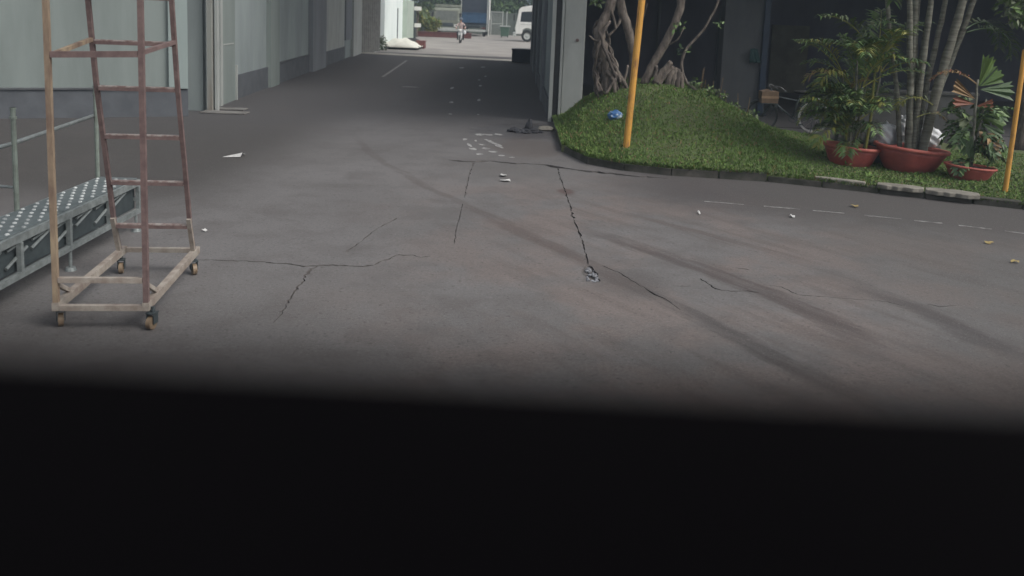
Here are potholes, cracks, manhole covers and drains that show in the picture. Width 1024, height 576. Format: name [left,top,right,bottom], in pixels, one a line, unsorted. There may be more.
crack [606,267,902,309]
crack [450,160,667,179]
crack [219,218,429,323]
pothole [581,266,601,283]
